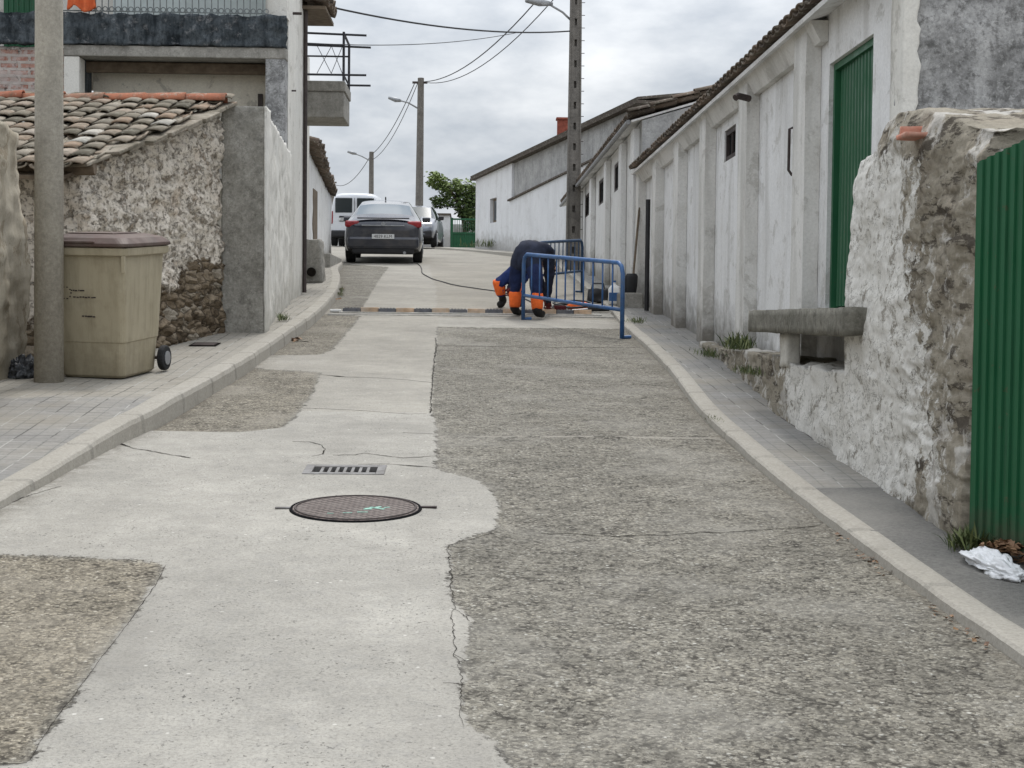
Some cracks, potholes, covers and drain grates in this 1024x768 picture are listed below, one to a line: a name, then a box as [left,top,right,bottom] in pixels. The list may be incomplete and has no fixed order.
drain grate [302,464,387,475]
crack [541,525,820,537]
manhole cover [275,495,437,523]
crack [446,533,493,723]
